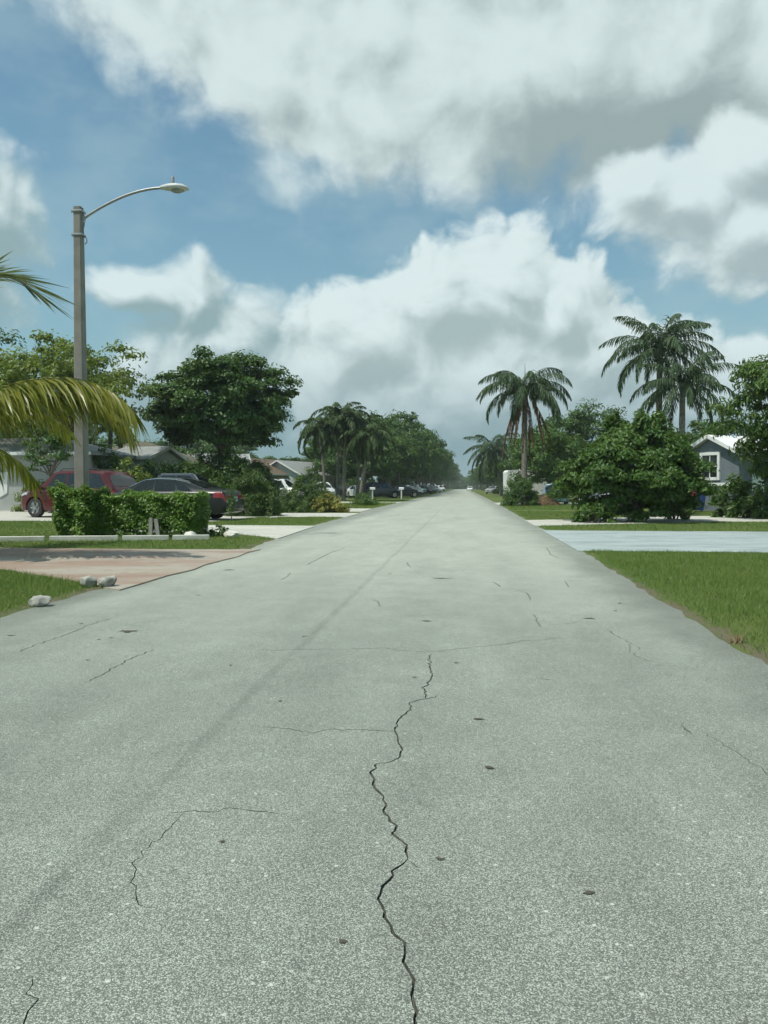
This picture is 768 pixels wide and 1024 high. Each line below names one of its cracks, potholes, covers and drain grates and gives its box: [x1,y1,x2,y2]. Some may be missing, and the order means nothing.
crack [271,616,575,1024]
crack [130,807,278,908]
crack [23,978,40,1024]
